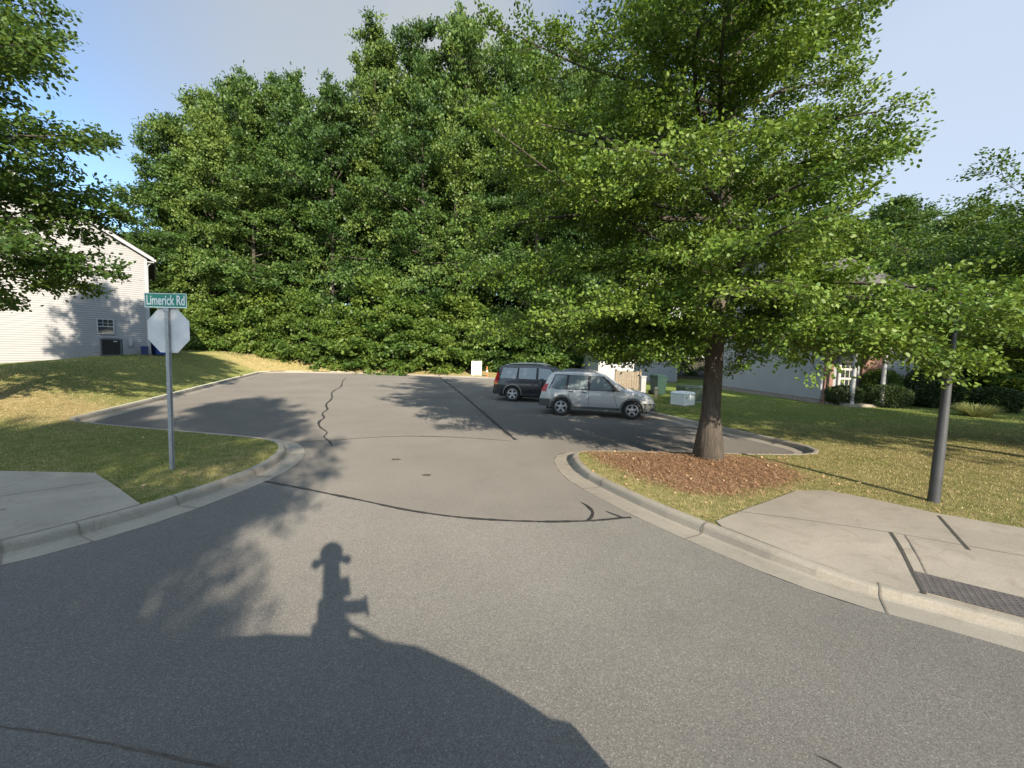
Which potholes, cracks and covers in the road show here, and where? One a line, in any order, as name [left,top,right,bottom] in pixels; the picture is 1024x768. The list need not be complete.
crack [302,378,506,447]
